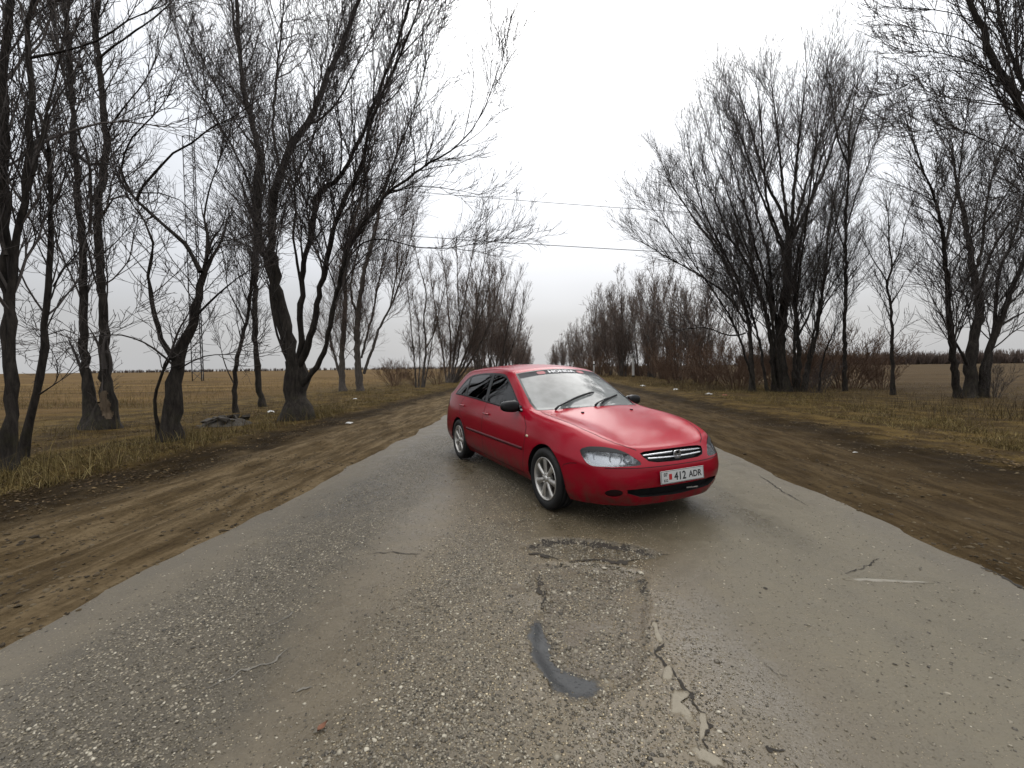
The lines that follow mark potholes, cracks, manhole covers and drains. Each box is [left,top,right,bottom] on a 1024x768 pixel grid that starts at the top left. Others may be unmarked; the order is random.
pothole [528,564,652,700]
crack [208,647,312,692]
crack [650,620,733,768]
pothole [522,537,662,565]
